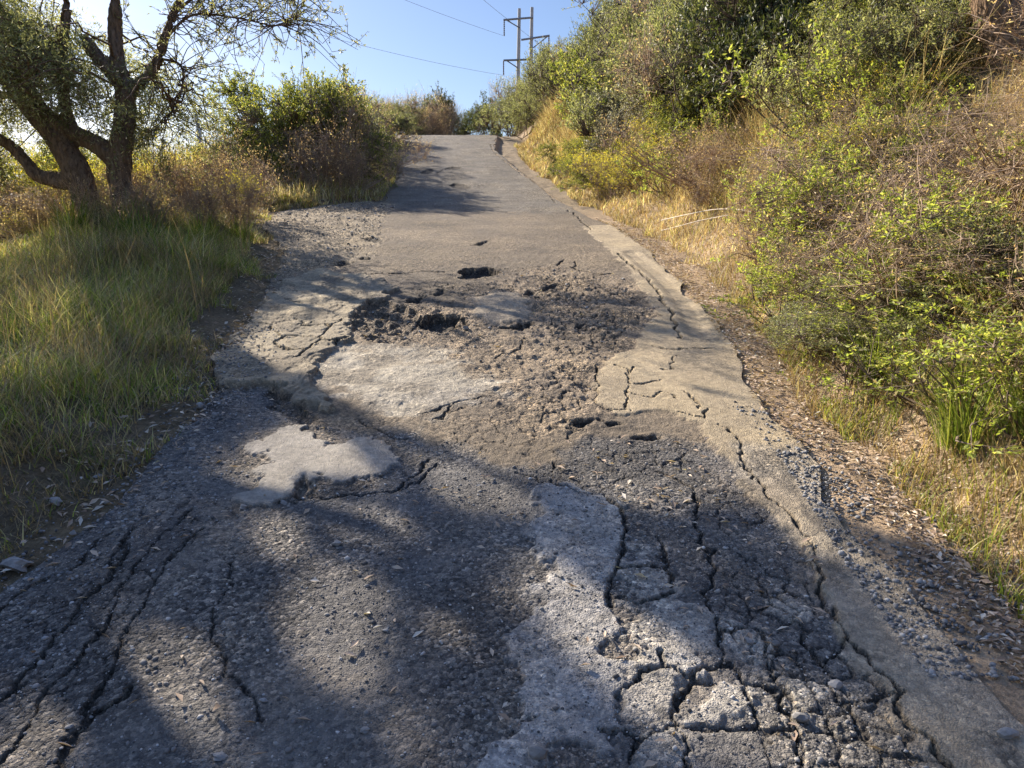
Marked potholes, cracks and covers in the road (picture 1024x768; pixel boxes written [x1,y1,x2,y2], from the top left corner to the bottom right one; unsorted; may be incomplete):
pothole [397,291,432,307]
pothole [431,286,453,297]
crack [273,252,960,768]
pothole [342,297,429,348]
pothole [624,431,672,443]
pothole [562,412,631,435]
crack [250,297,351,359]
pothole [421,311,472,335]
